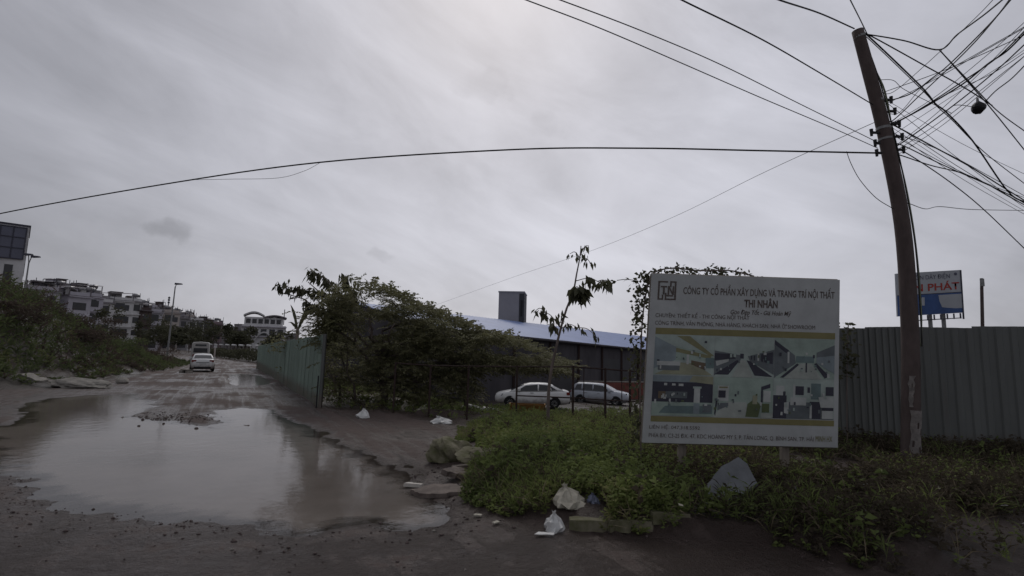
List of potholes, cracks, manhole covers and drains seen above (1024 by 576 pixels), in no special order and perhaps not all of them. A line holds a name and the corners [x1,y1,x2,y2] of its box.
pothole [216,373,280,387]
pothole [0,392,475,549]
